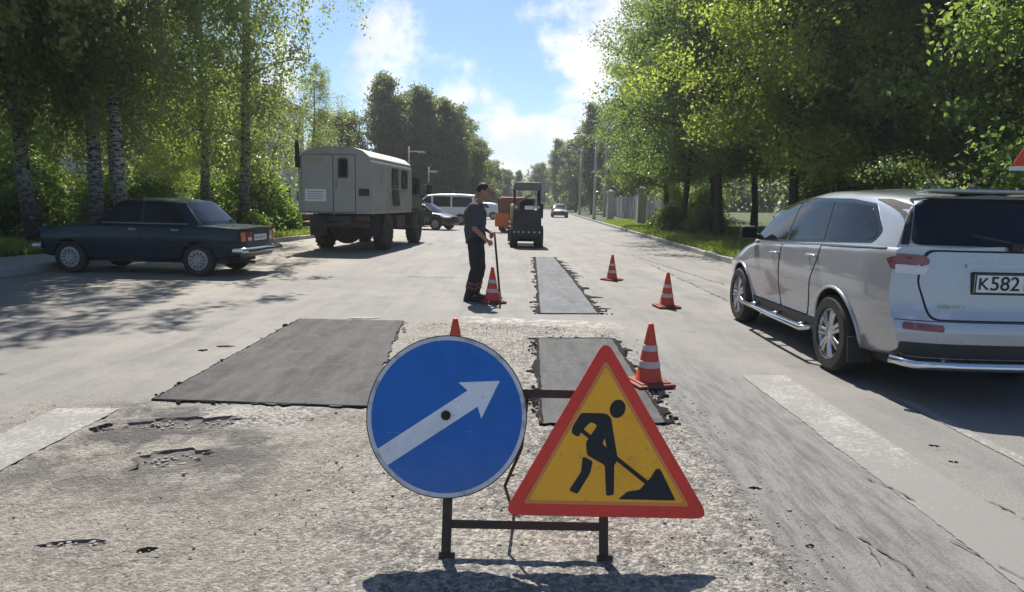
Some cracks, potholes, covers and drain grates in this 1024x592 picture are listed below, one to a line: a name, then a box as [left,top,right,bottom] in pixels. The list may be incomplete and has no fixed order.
pothole [109,414,254,434]
pothole [118,445,224,475]
pothole [120,541,173,560]
pothole [20,534,121,556]
pothole [919,442,950,451]
pothole [79,421,129,436]
crack [835,526,933,589]
crack [948,538,1024,578]
